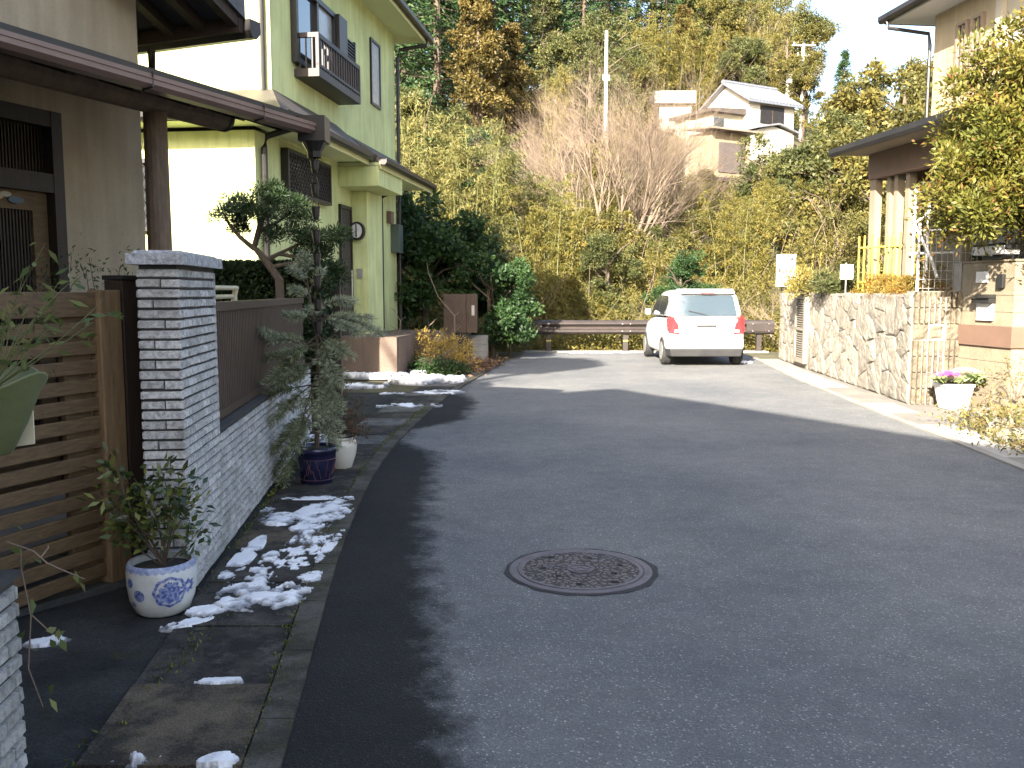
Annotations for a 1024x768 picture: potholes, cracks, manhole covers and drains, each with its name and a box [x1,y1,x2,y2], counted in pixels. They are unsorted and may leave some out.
manhole cover [504,549,659,595]
